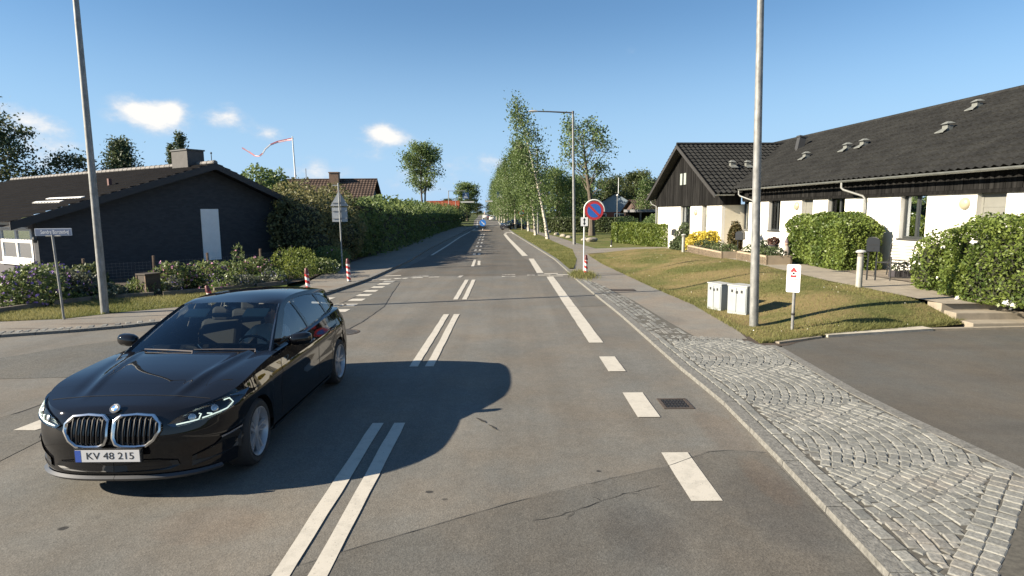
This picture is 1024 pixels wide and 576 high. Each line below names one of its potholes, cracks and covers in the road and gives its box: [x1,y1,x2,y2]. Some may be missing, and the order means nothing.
drain grate [656,398,695,409]
crack [536,486,656,520]
